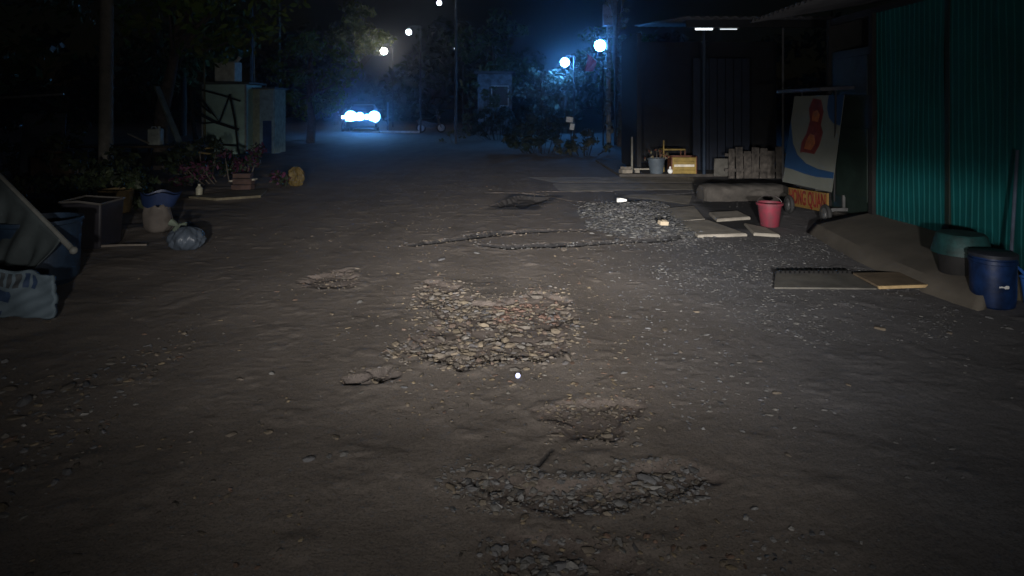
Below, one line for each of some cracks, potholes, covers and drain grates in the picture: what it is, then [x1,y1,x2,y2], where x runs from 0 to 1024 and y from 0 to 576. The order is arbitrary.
pothole [530,396,653,449]
pothole [378,278,589,373]
pothole [489,195,551,209]
pothole [434,456,726,522]
pothole [476,524,648,576]
pothole [296,269,363,290]
